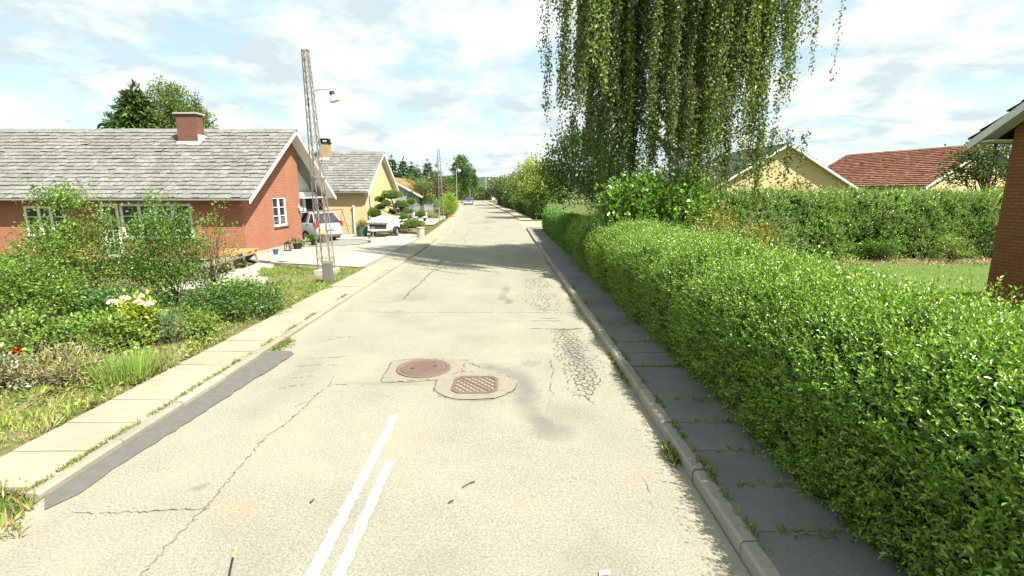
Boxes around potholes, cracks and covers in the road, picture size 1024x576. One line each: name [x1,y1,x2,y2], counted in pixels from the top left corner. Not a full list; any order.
crack [73,336,364,576]
crack [516,278,605,403]
manhole cover [396,359,451,378]
drain grate [451,376,499,394]
